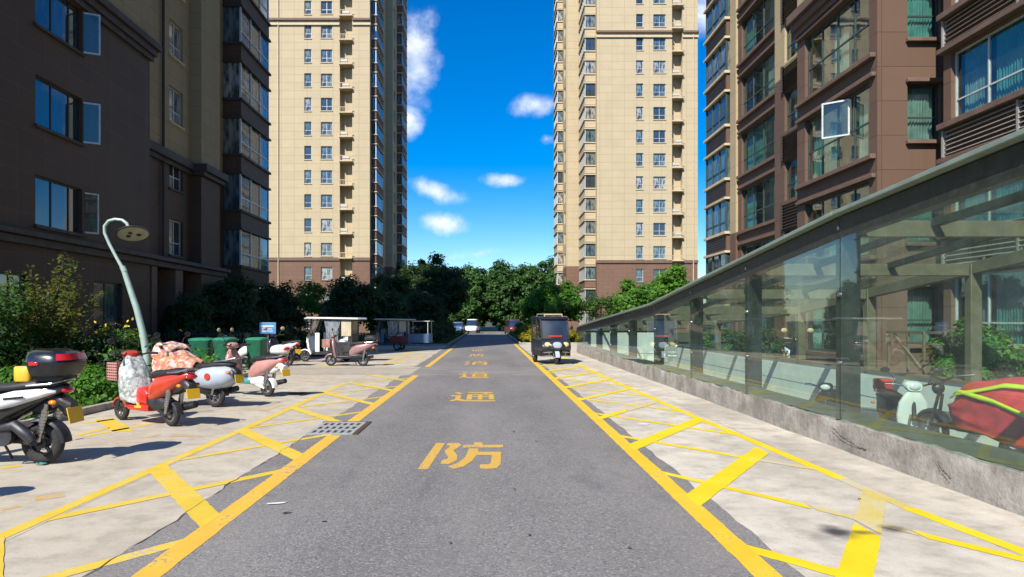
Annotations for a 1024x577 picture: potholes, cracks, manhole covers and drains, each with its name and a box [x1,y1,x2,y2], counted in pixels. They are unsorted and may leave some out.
drain grate [305,421,372,435]
